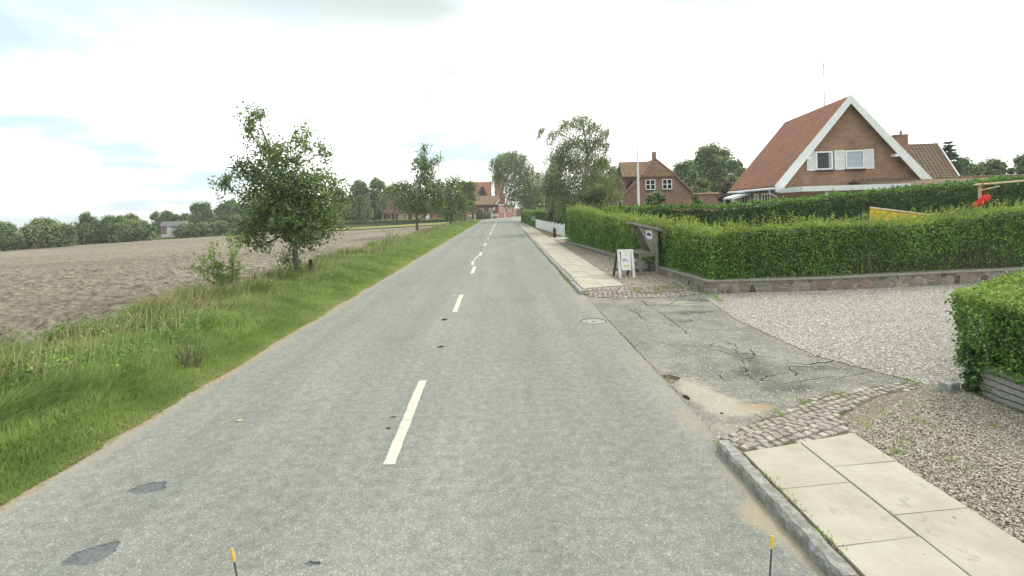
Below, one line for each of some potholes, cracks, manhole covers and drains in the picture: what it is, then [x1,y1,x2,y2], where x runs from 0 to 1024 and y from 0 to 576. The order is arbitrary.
pothole [661,374,680,384]
crack [597,299,712,392]
crack [710,341,887,400]
